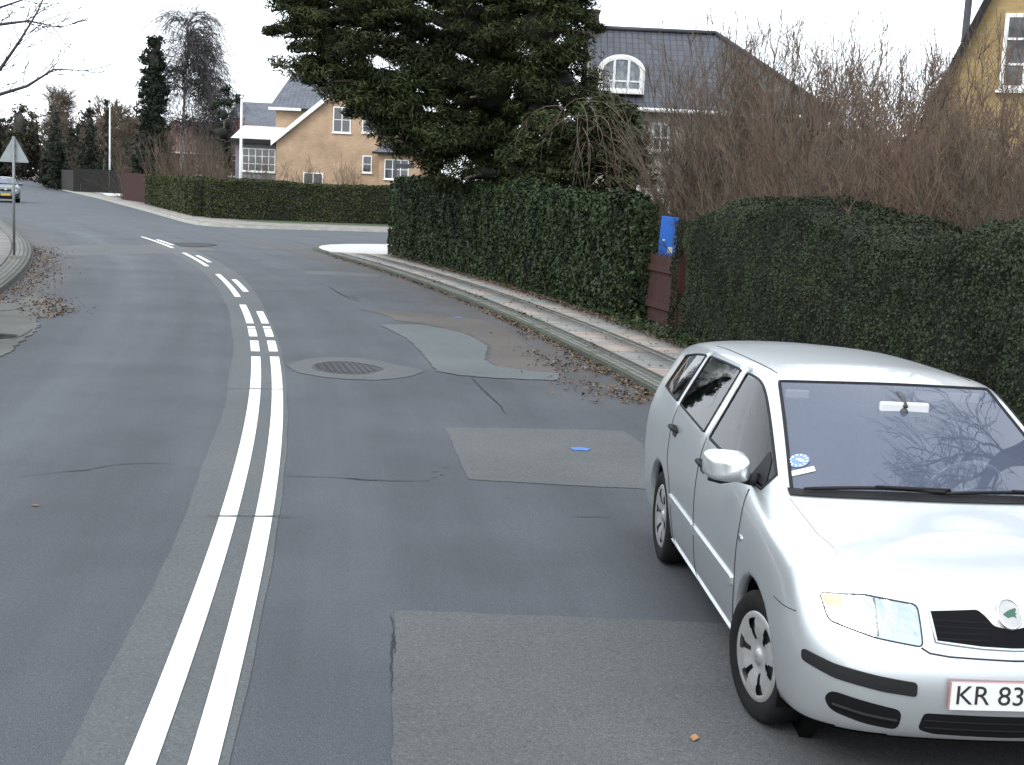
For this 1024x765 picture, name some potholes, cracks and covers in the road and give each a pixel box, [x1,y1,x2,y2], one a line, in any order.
crack [284,466,448,481]
